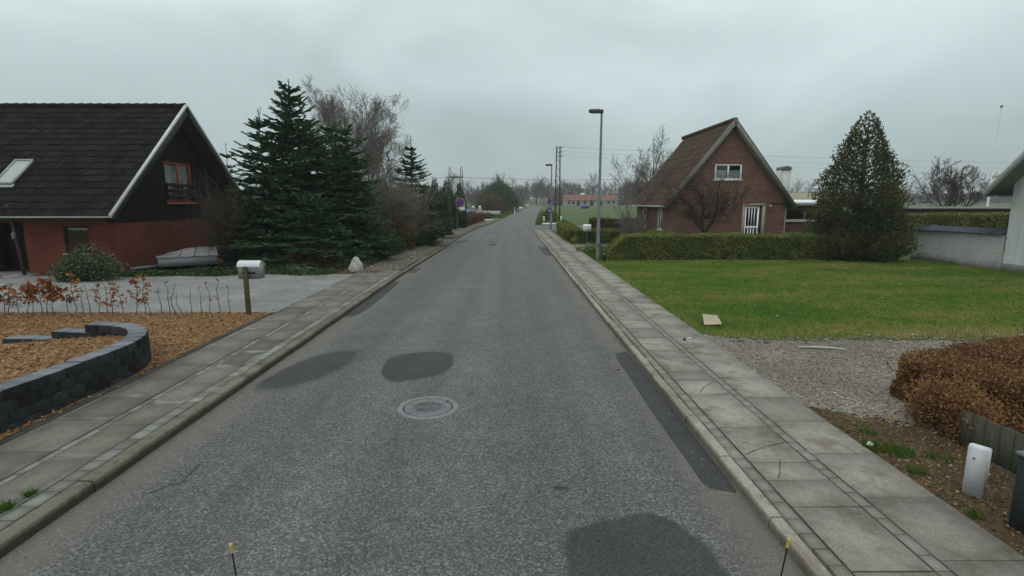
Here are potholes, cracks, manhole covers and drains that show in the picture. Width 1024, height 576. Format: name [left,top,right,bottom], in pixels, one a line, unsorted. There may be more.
manhole cover [397,396,459,420]
